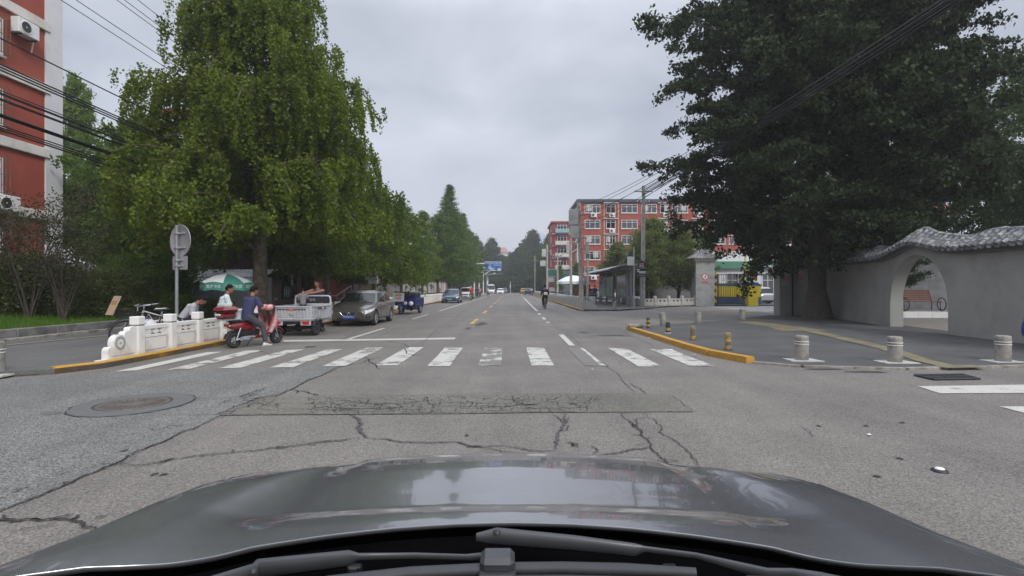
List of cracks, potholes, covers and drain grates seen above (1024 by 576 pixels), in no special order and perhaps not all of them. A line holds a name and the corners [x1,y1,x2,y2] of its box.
manhole cover [64,393,196,418]
crack [0,513,105,534]
crack [115,361,698,465]
